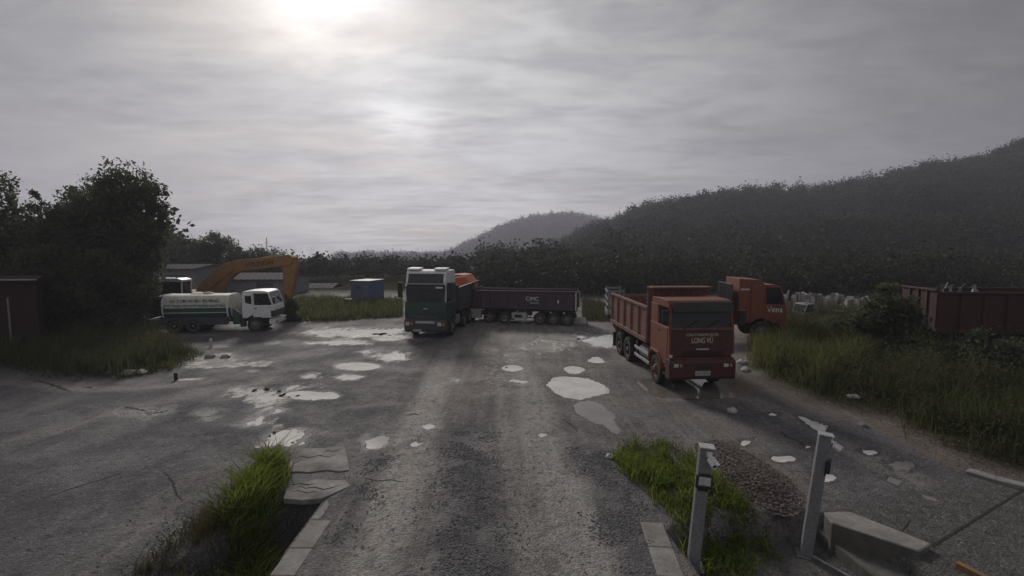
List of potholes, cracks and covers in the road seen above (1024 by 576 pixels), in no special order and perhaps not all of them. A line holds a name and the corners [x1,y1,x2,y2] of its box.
pothole [266,429,305,446]
pothole [281,391,340,400]
pothole [798,416,828,432]
pothole [546,376,609,400]
crack [163,471,183,501]
crack [38,381,92,391]
pothole [573,400,620,434]
crack [45,473,121,498]
pothole [241,389,300,405]
pothole [336,362,380,371]
crack [292,483,339,493]
pothole [365,436,389,449]
